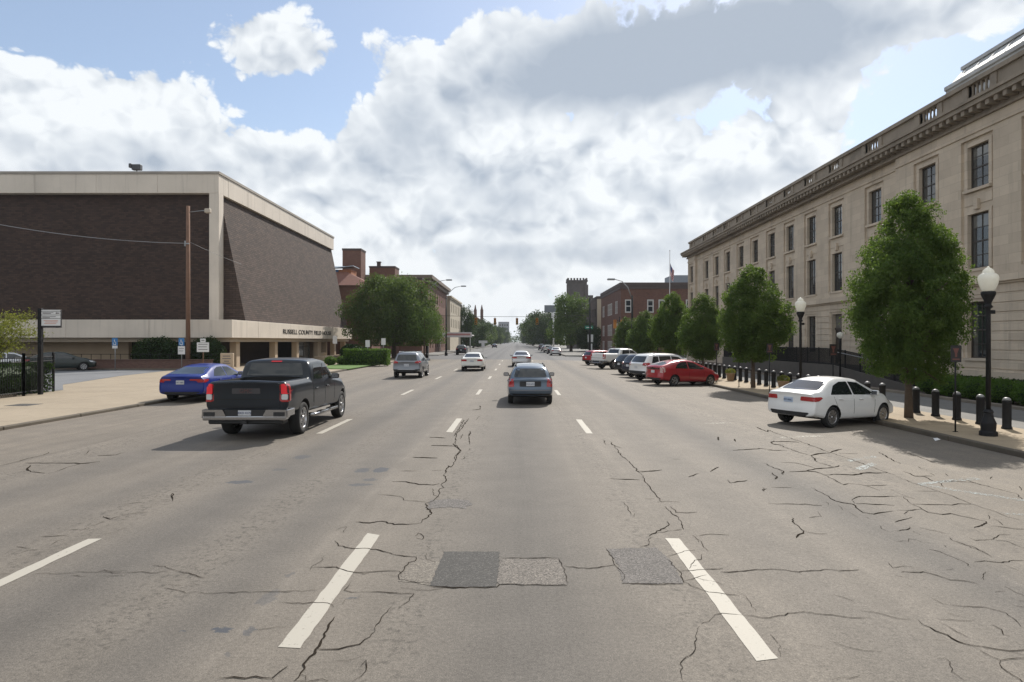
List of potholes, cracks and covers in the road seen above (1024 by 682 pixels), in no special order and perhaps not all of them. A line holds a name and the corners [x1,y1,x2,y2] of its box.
crack [688,427,1024,682]
crack [6,406,481,681]
crack [604,441,902,680]
